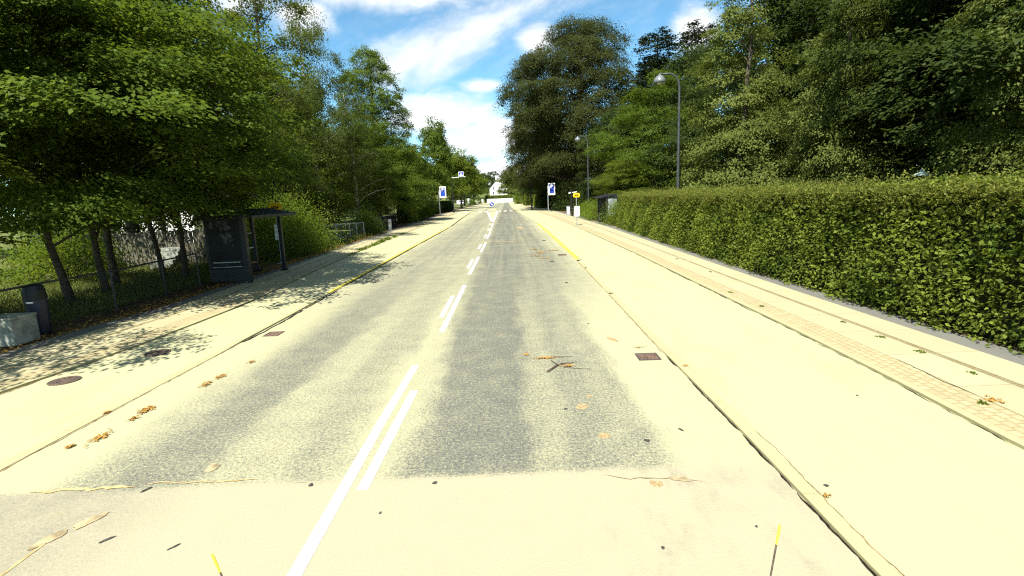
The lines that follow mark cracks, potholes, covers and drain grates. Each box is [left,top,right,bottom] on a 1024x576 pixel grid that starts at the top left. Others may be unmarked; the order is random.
manhole cover [46,376,82,386]
crack [29,478,260,493]
